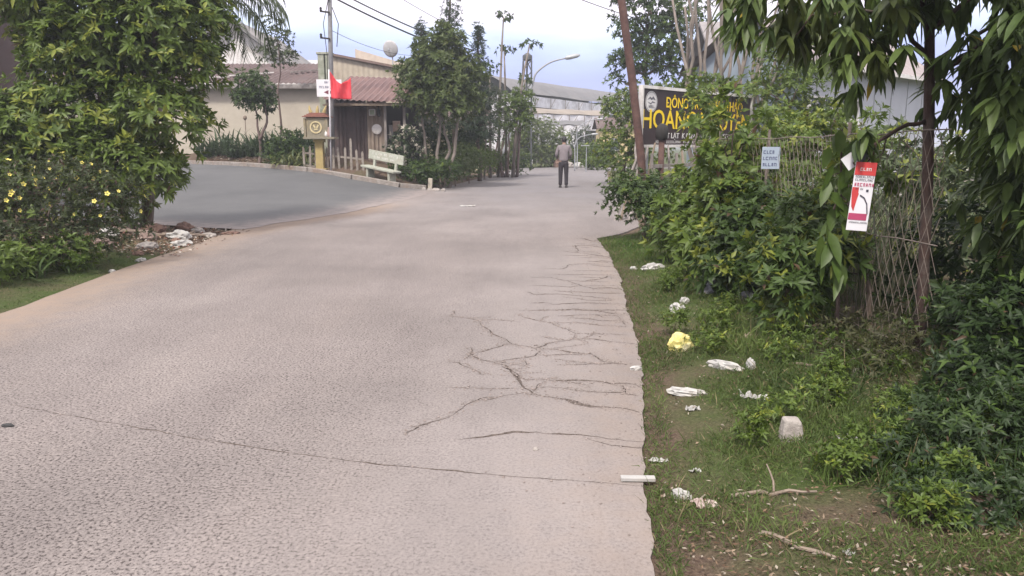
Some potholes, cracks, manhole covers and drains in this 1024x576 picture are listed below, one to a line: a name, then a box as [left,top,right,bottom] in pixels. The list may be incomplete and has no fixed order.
crack [405,239,644,435]
crack [13,404,635,486]
